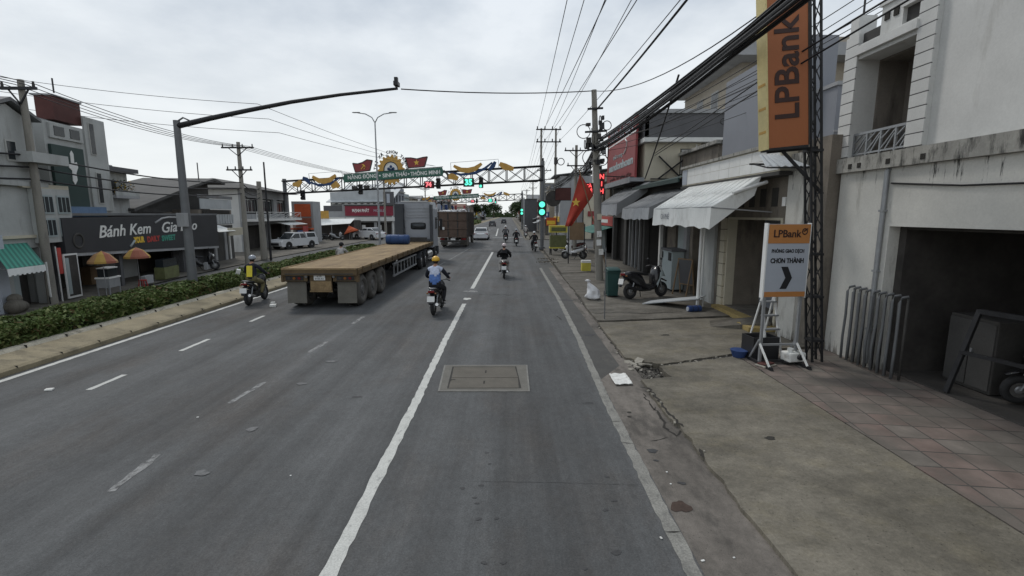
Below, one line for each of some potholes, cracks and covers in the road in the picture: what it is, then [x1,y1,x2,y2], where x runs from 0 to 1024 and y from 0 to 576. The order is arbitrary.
crack [641,387,684,436]
pothole [634,365,664,379]
manhole cover [438,365,530,392]
